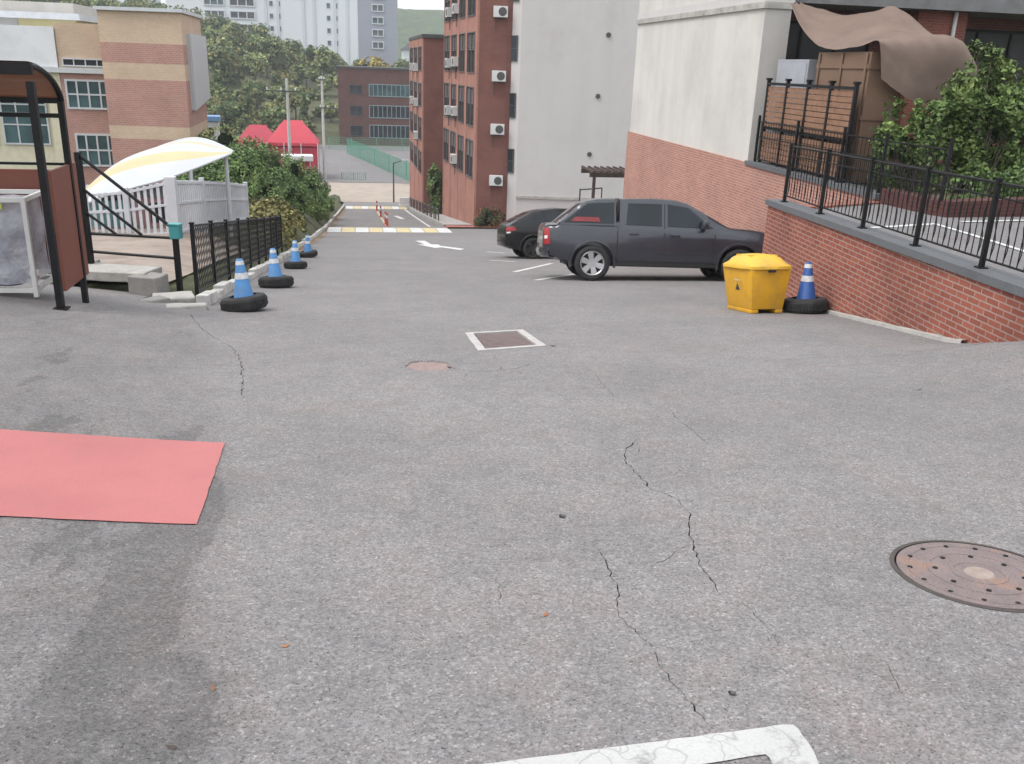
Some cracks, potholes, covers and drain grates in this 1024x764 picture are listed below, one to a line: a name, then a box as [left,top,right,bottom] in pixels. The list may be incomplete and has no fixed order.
crack [601,554,705,721]
crack [624,443,717,590]
manhole cover [889,540,1024,613]
